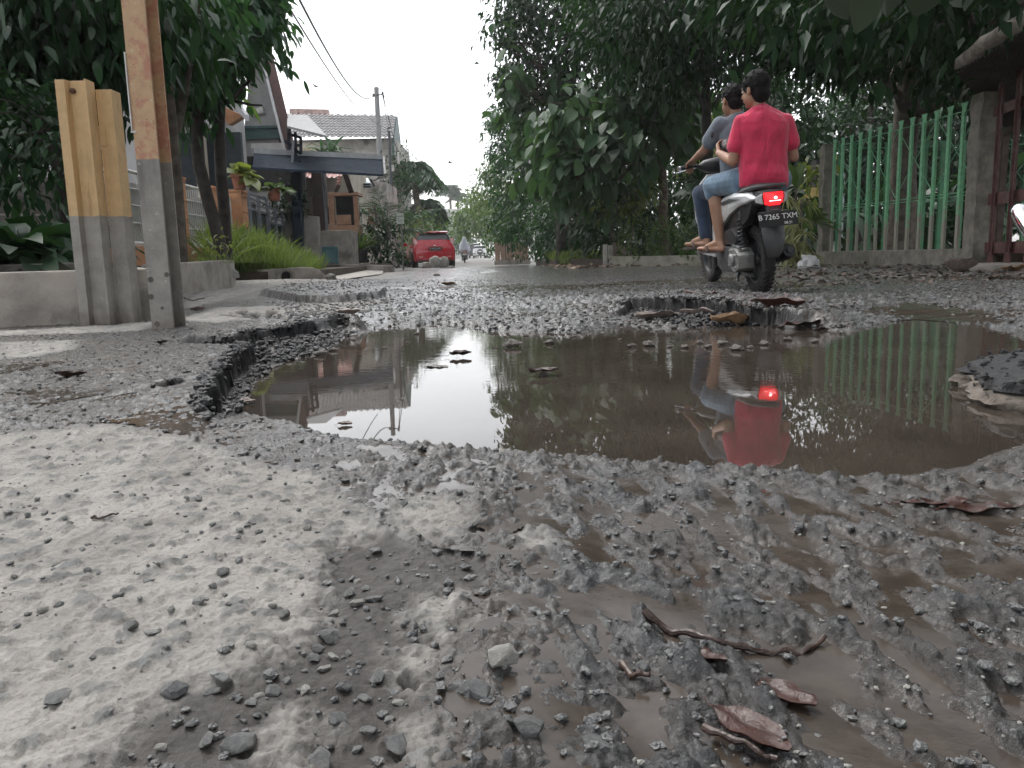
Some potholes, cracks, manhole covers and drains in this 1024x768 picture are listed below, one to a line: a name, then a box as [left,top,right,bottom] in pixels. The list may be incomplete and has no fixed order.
pothole [199,296,1024,483]
